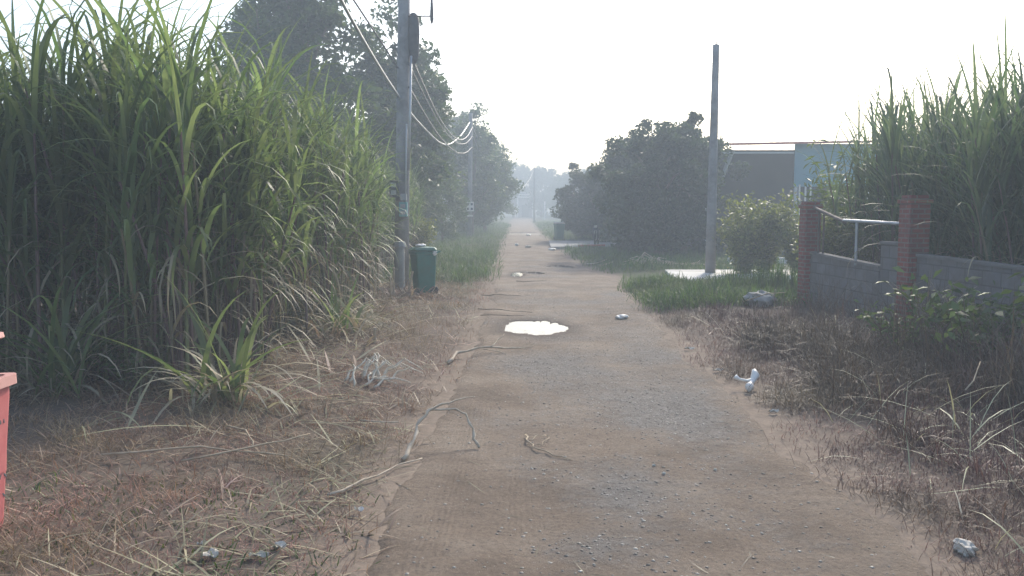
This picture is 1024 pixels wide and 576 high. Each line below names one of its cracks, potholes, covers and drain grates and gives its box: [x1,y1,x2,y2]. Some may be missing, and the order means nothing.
pothole [498,319,575,337]
